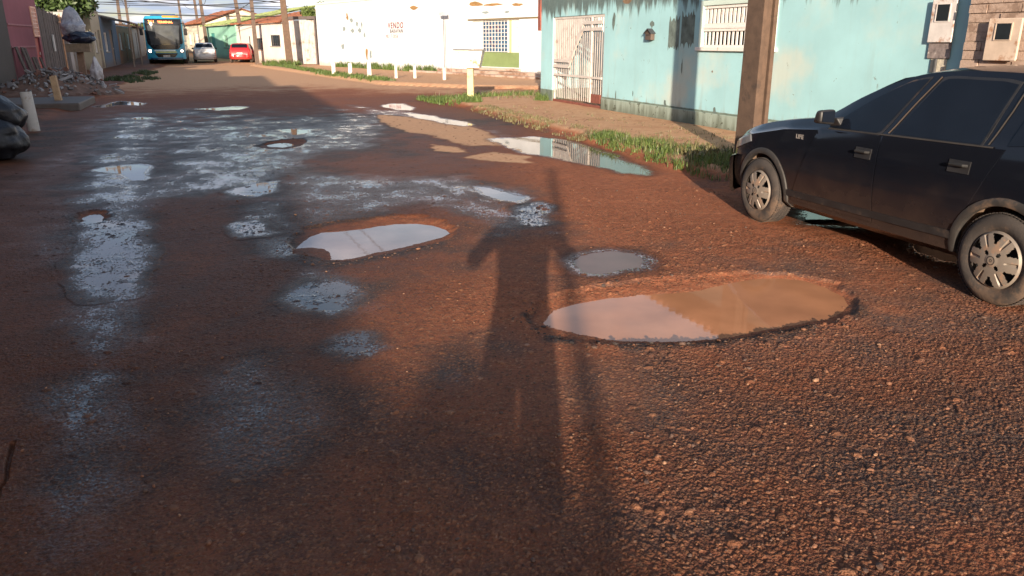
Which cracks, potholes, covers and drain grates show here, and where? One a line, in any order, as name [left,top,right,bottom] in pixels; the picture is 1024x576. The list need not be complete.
pothole [518,269,863,347]
pothole [284,213,462,264]
pothole [251,138,310,149]
pothole [69,208,118,225]
